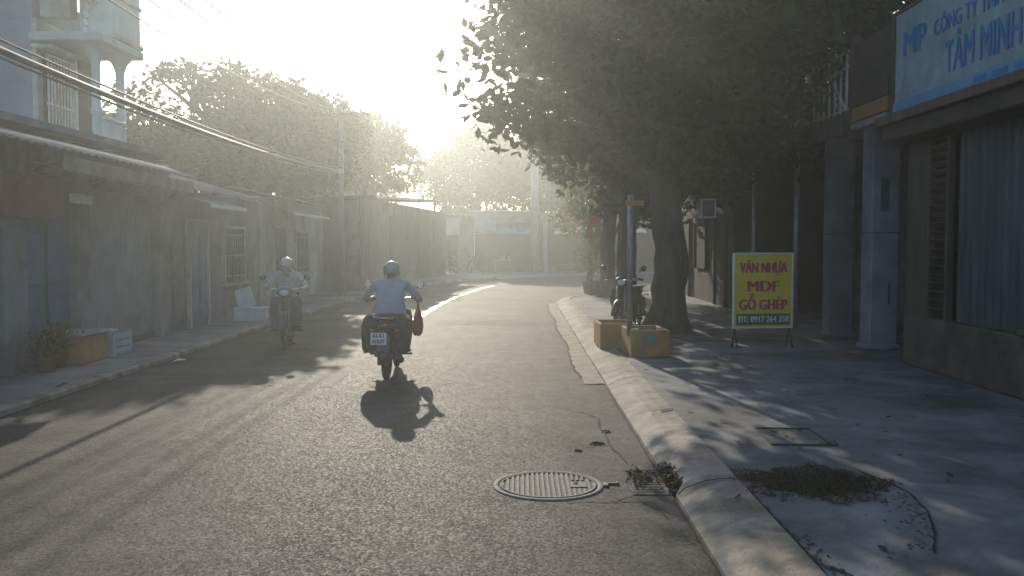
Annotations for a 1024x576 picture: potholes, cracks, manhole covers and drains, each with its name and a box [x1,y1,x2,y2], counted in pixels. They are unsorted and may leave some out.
manhole cover [493,471,619,501]
crack [571,411,627,463]
drain grate [622,465,672,496]
utility cover [754,427,839,446]
